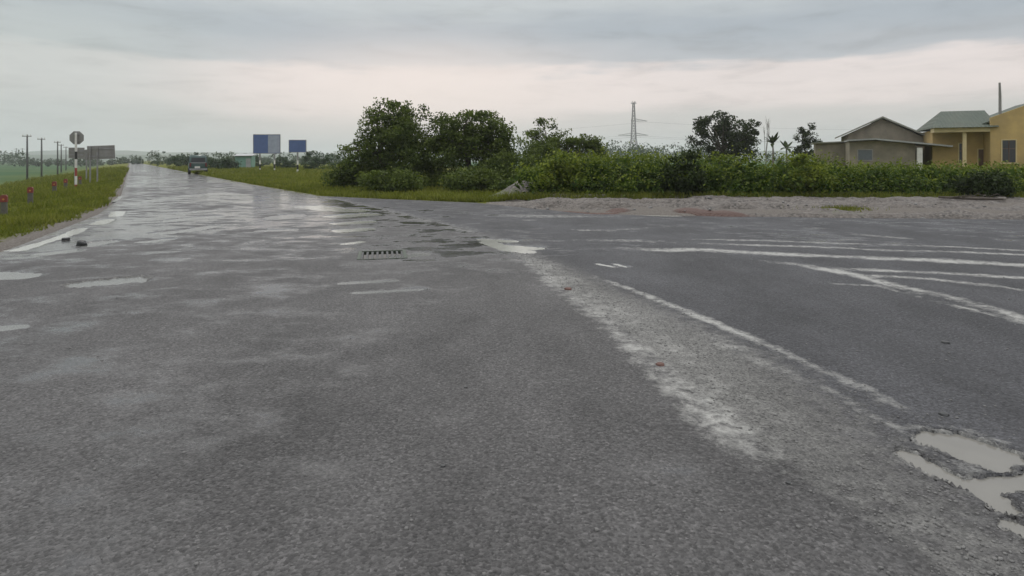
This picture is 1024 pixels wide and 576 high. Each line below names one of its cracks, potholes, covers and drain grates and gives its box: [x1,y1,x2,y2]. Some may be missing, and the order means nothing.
pothole [893,448,1024,516]
drain grate [357,250,407,260]
pothole [910,428,1024,476]
pothole [997,518,1024,537]
